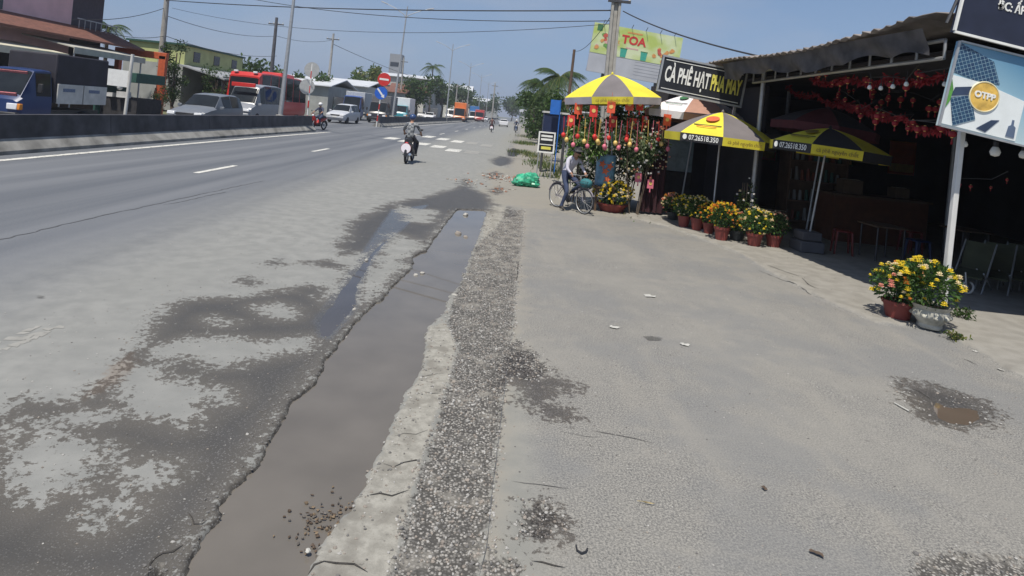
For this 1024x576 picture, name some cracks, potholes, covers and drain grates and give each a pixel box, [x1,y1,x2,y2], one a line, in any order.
crack [308,561,366,575]
pothole [893,379,1000,428]
pothole [167,208,489,576]
